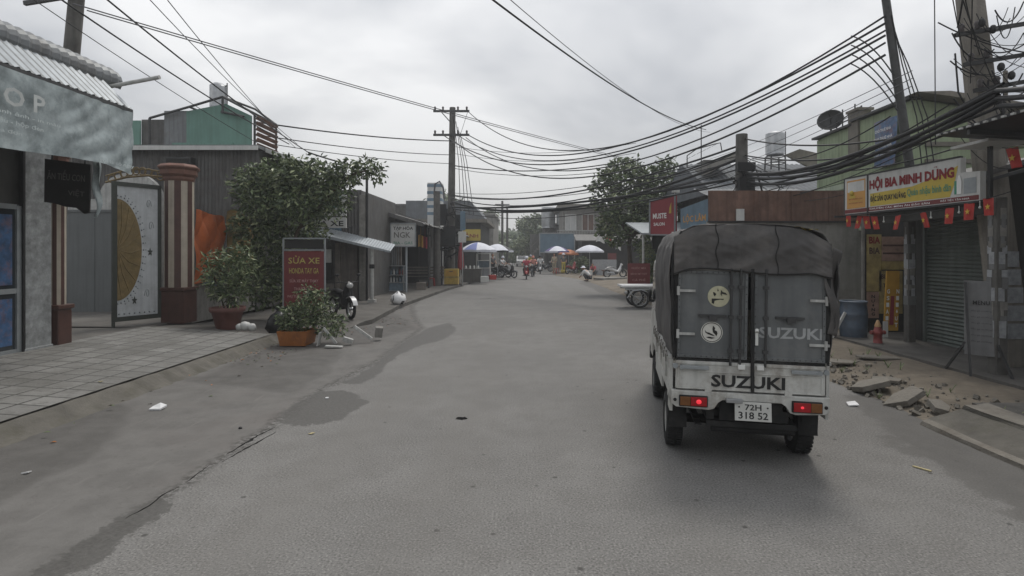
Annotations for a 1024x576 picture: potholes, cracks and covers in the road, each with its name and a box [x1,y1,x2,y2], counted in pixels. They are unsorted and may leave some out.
crack [128,428,274,517]
